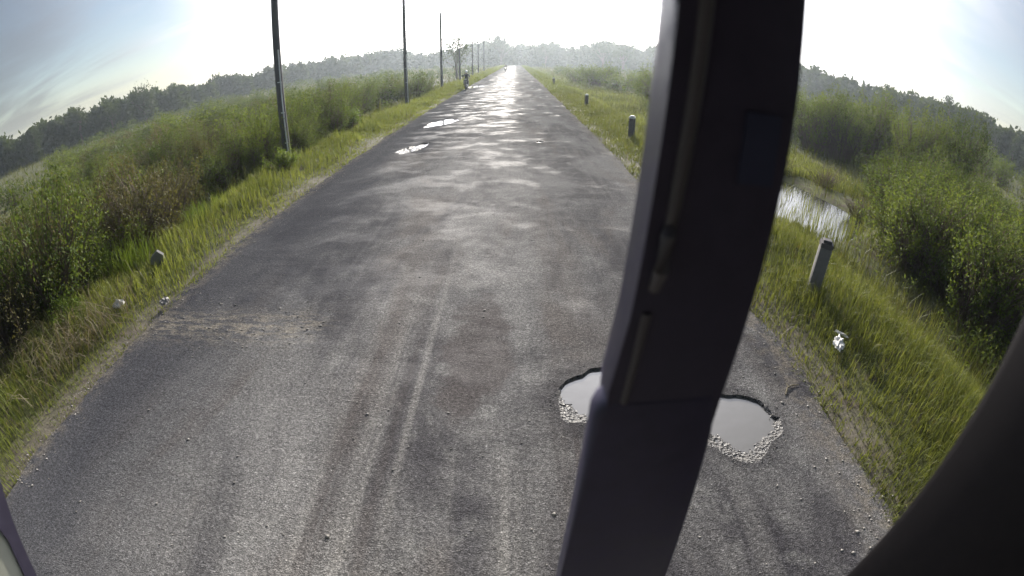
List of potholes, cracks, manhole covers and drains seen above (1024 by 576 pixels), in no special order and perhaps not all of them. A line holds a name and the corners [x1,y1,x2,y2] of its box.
pothole [395,142,430,154]
pothole [708,387,798,479]
pothole [423,118,459,128]
pothole [543,364,602,432]
